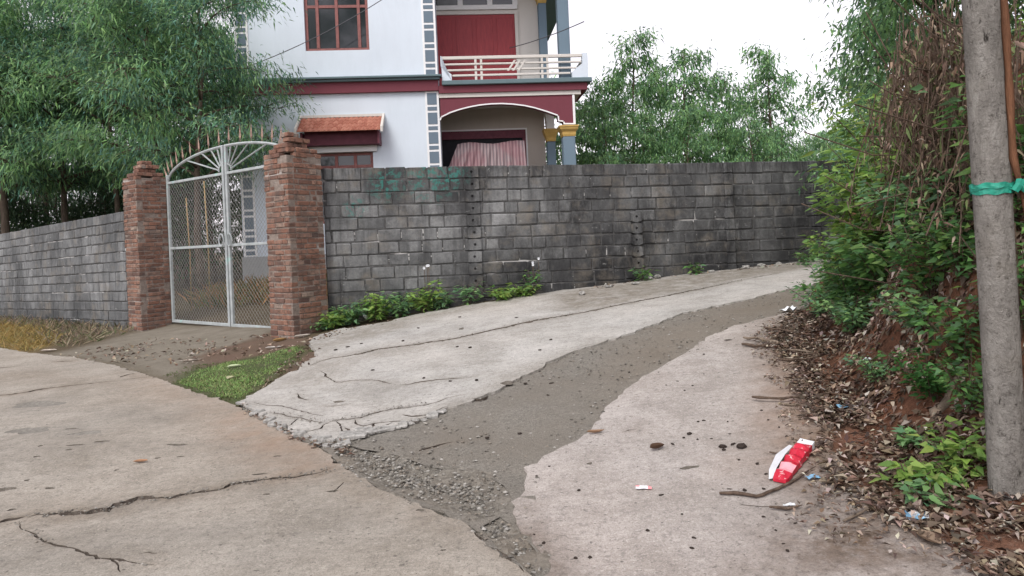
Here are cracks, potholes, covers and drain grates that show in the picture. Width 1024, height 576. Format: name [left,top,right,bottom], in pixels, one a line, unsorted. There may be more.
crack [254,372,457,431]
crack [0,469,343,572]
crack [310,280,741,366]
pothole [475,518,551,574]
pothole [335,446,515,522]
